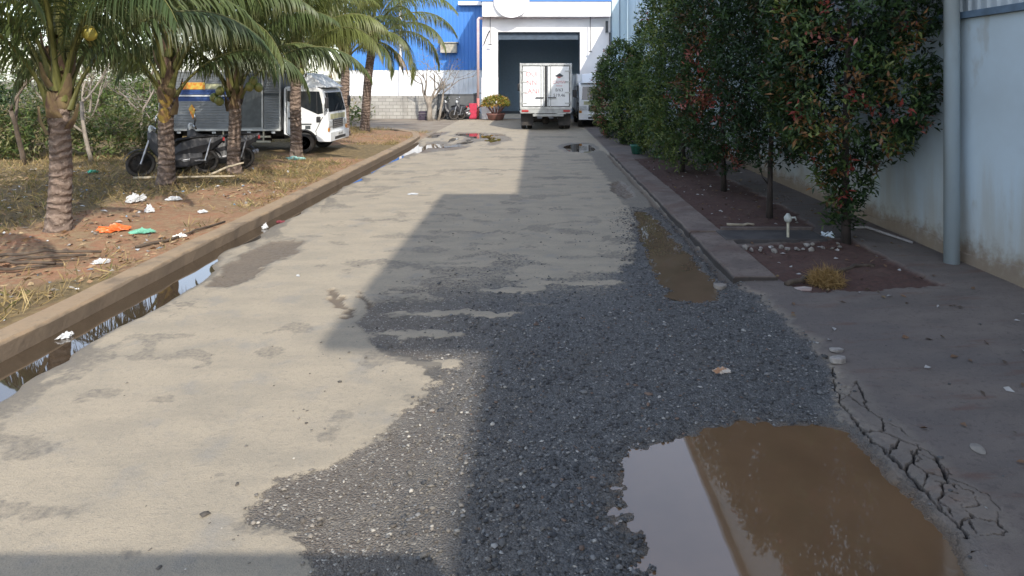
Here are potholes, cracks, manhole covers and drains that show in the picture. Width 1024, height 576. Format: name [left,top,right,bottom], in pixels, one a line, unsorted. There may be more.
pothole [634,211,721,304]
pothole [559,143,596,153]
pothole [325,288,359,319]
pothole [600,416,990,576]
crack [831,368,1008,539]
